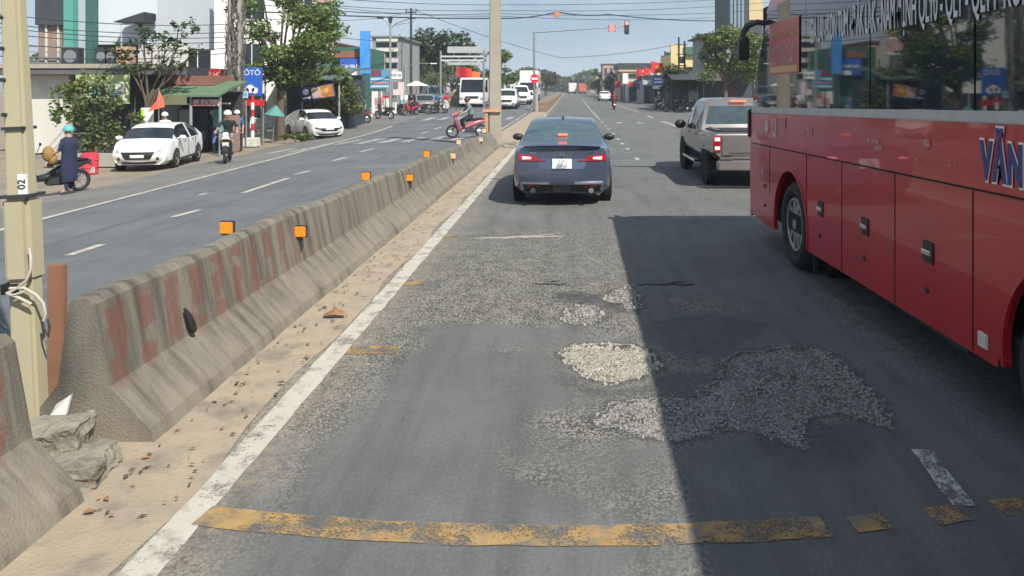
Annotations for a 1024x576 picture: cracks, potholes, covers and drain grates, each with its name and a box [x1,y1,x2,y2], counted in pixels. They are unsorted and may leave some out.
pothole [558,341,663,386]
pothole [560,304,605,326]
pothole [601,286,644,311]
pothole [593,345,894,450]
